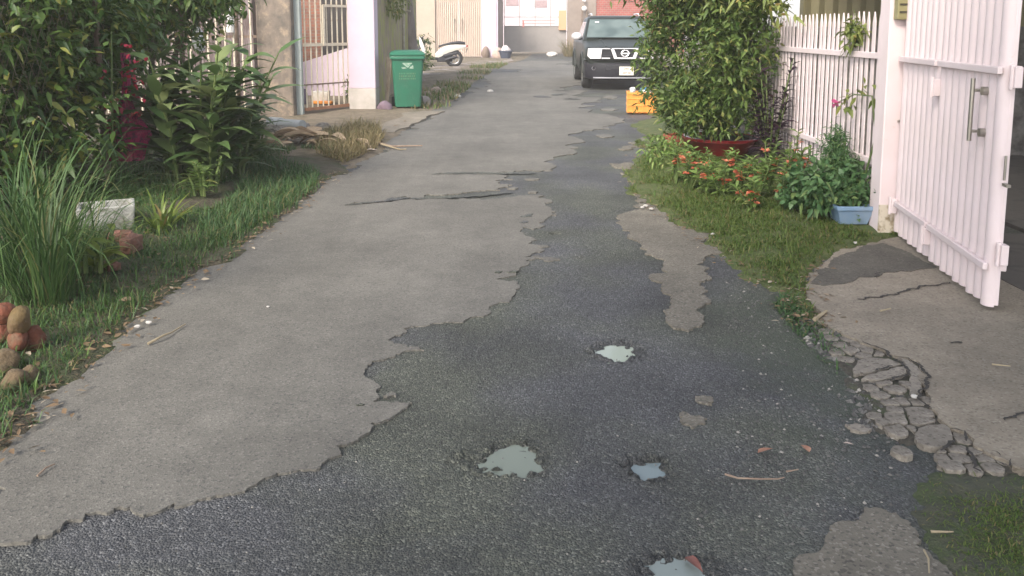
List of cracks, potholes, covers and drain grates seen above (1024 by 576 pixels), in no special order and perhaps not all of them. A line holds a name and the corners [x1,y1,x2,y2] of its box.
pothole [585,337,648,364]
pothole [471,437,550,479]
pothole [621,453,668,484]
pothole [626,551,729,576]
crack [862,341,932,407]
crack [1003,411,1024,420]
crack [940,428,1011,472]
